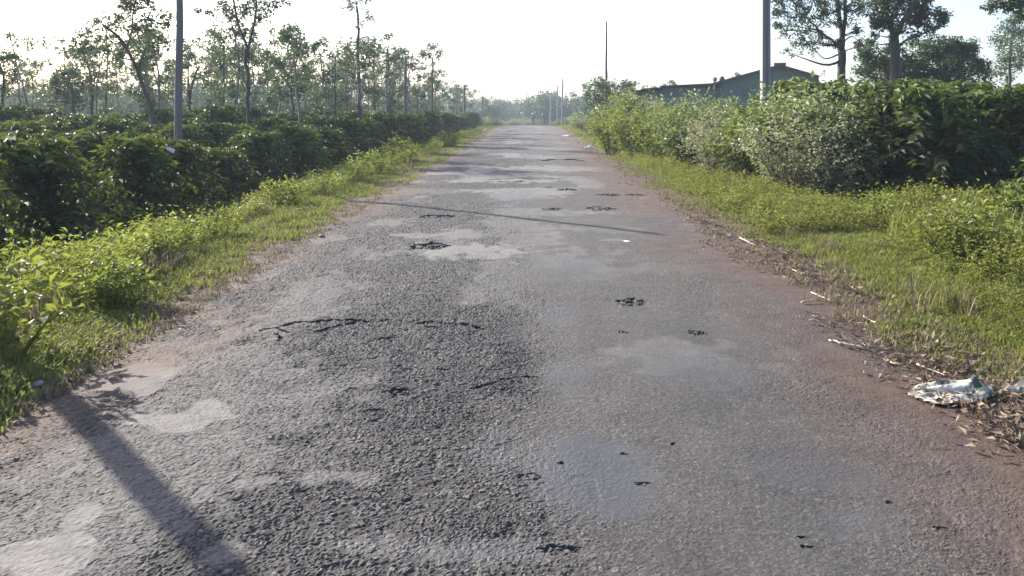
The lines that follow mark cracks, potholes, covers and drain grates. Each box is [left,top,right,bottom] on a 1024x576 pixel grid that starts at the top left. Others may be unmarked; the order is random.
pothole [616,298,645,306]
pothole [536,545,581,556]
